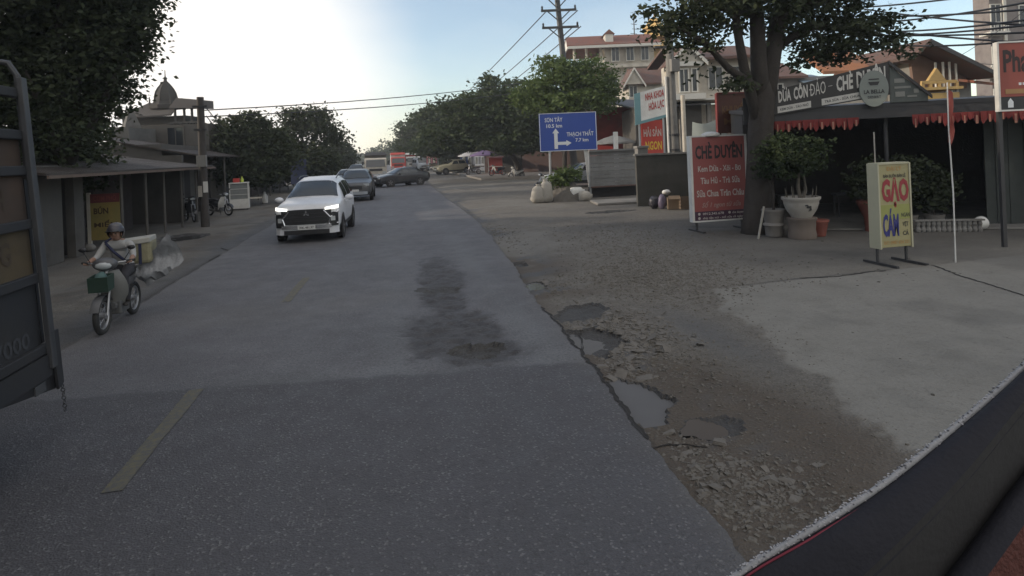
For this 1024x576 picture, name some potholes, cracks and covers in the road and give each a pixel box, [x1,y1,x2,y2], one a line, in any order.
pothole [552,302,610,323]
pothole [564,326,629,359]
crack [541,307,707,449]
crack [804,270,886,278]
pothole [677,414,748,441]
pothole [607,377,679,429]
